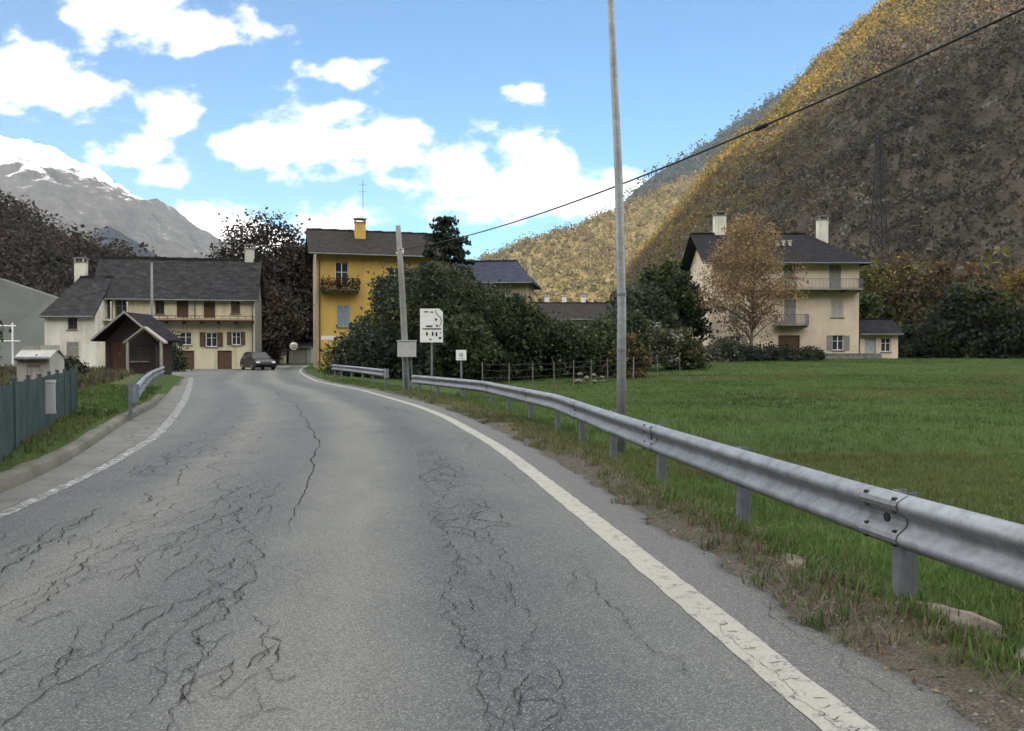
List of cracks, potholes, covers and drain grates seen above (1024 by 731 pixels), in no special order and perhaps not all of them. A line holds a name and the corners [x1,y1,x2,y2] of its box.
crack [416,452,566,731]
crack [566,556,686,673]
crack [0,473,322,730]
crack [130,426,267,503]
